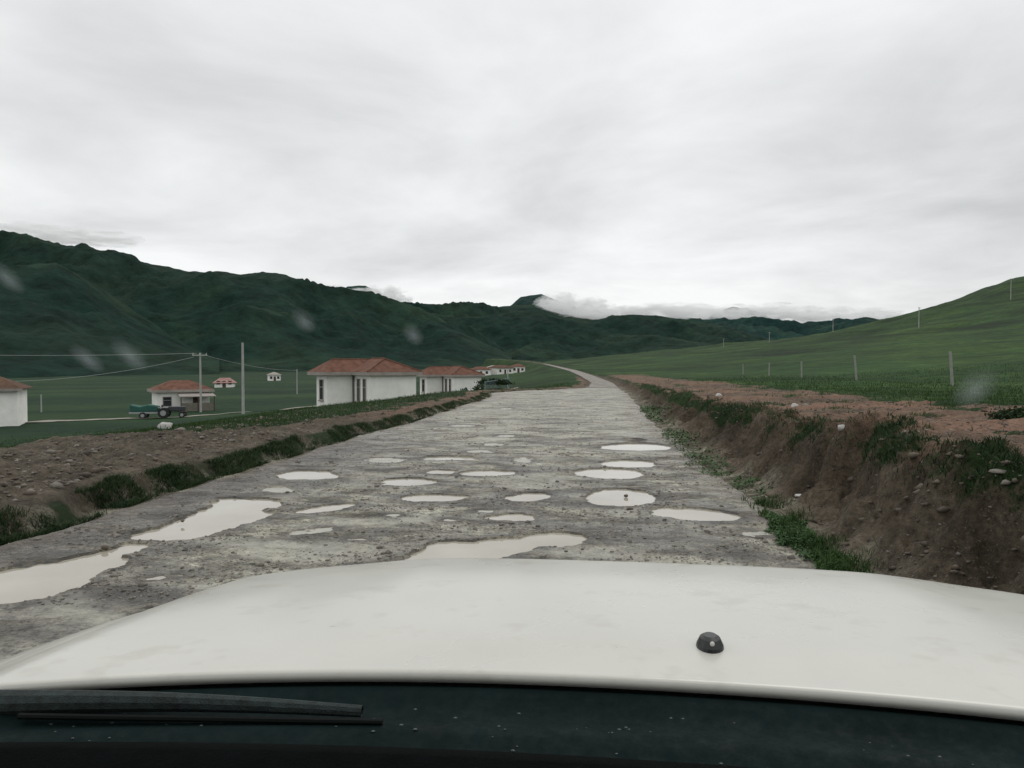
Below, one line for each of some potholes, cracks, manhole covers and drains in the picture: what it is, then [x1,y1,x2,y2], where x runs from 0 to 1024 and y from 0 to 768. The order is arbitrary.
pothole [482,512,539,521]
pothole [598,442,672,451]
pothole [273,469,341,480]
pothole [569,467,647,479]
pothole [645,505,745,521]
pothole [291,502,359,513]
pothole [502,492,553,501]
pothole [376,530,590,563]
pothole [124,496,284,541]
pothole [399,493,472,502]
pothole [583,487,661,506]
pothole [376,477,439,486]
